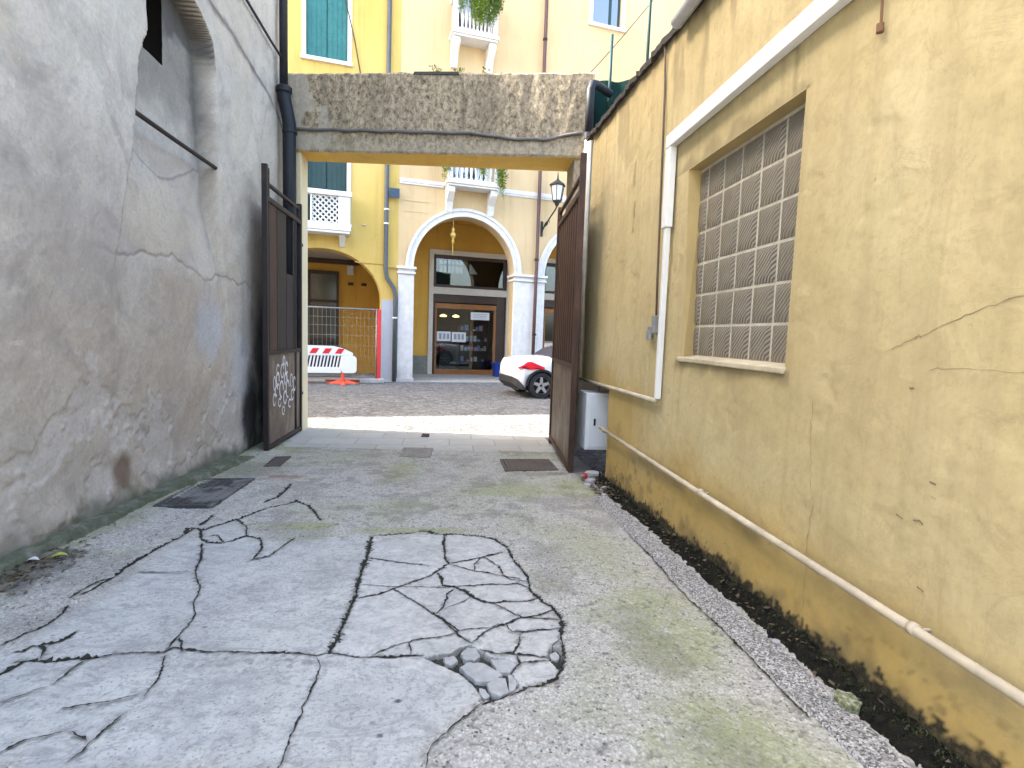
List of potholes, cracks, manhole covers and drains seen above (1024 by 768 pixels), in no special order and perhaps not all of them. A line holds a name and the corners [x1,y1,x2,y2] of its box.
manhole cover [264,456,291,467]
manhole cover [153,478,255,509]
pothole [432,651,509,702]
manhole cover [399,447,433,458]
manhole cover [500,459,559,472]
crack [0,484,567,768]
